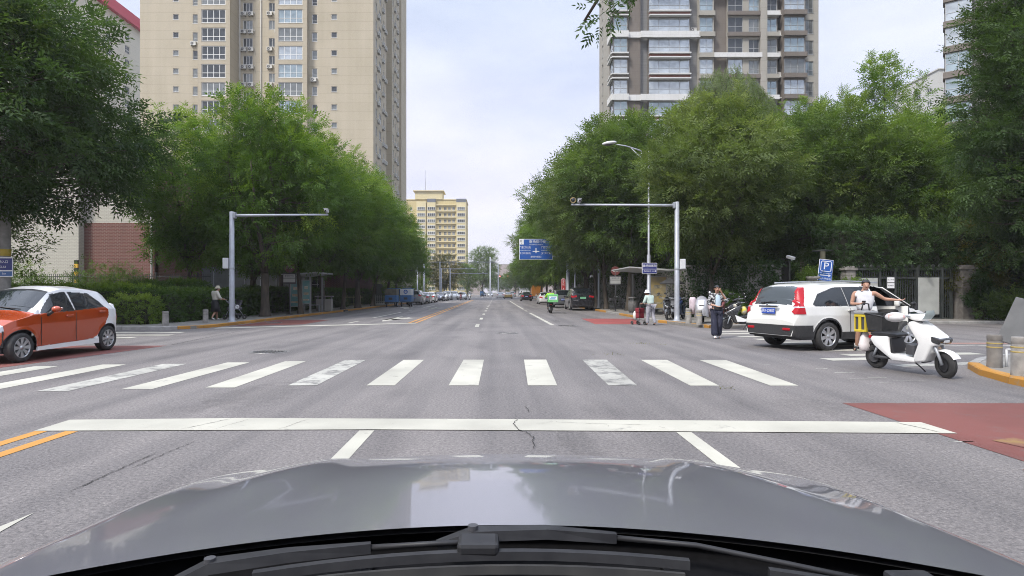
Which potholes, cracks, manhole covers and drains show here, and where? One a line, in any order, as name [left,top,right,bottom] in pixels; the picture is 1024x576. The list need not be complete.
crack [75,420,244,489]
